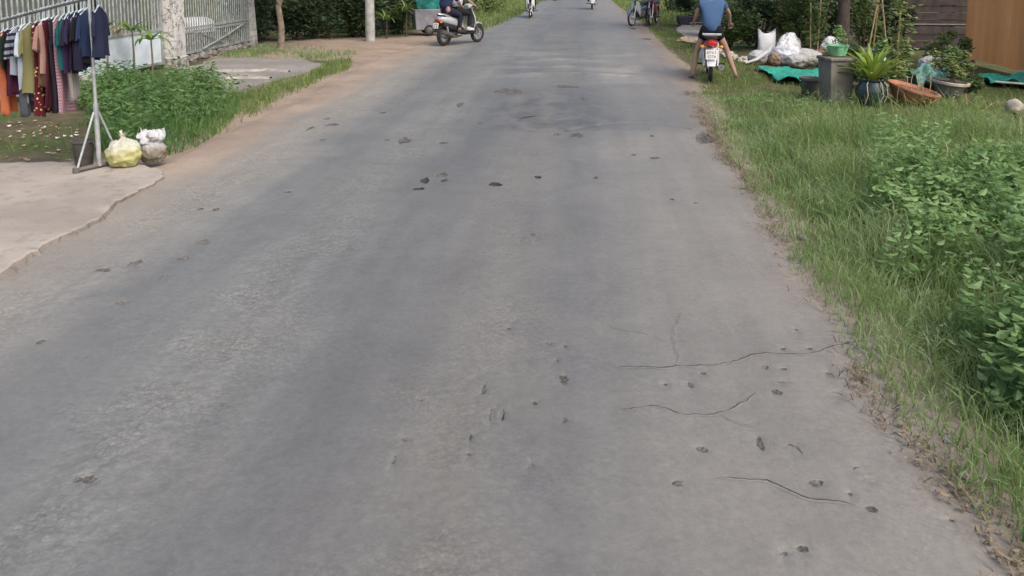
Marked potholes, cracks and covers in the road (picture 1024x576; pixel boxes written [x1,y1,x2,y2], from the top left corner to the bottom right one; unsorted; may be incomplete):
crack [619,392,758,427]
crack [716,476,867,511]
crack [609,314,873,370]
pothole [483,180,507,189]
